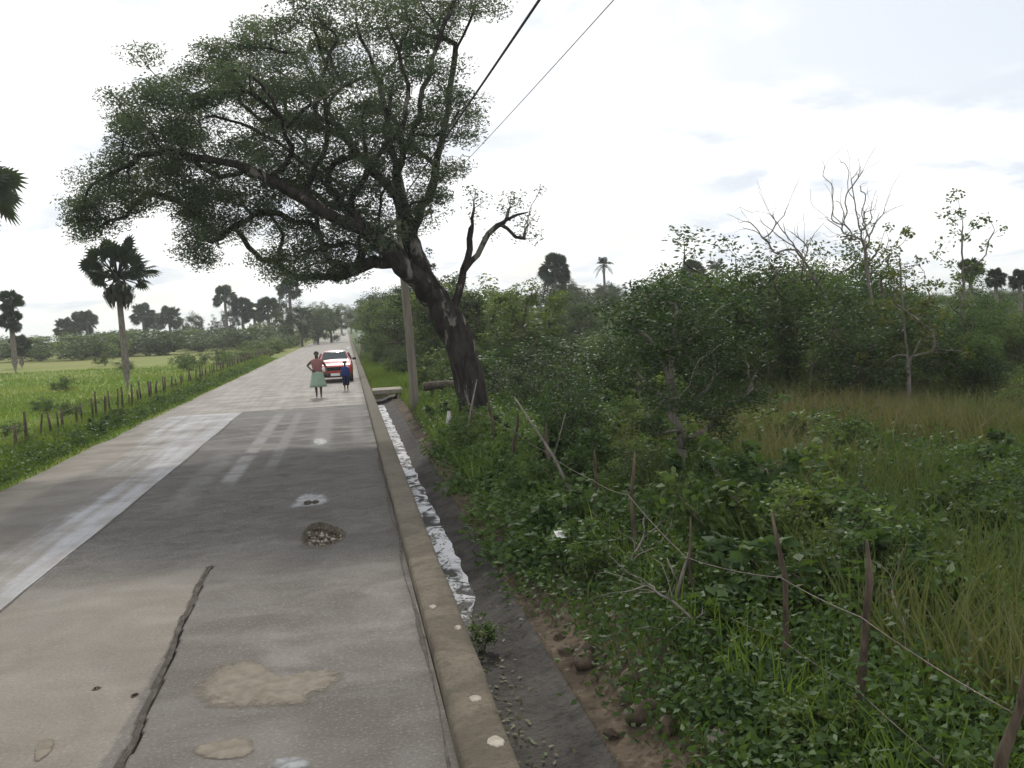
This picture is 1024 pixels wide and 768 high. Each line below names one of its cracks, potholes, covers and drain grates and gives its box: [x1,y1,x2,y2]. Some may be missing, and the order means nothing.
pothole [300,521,346,547]
crack [115,564,212,768]
